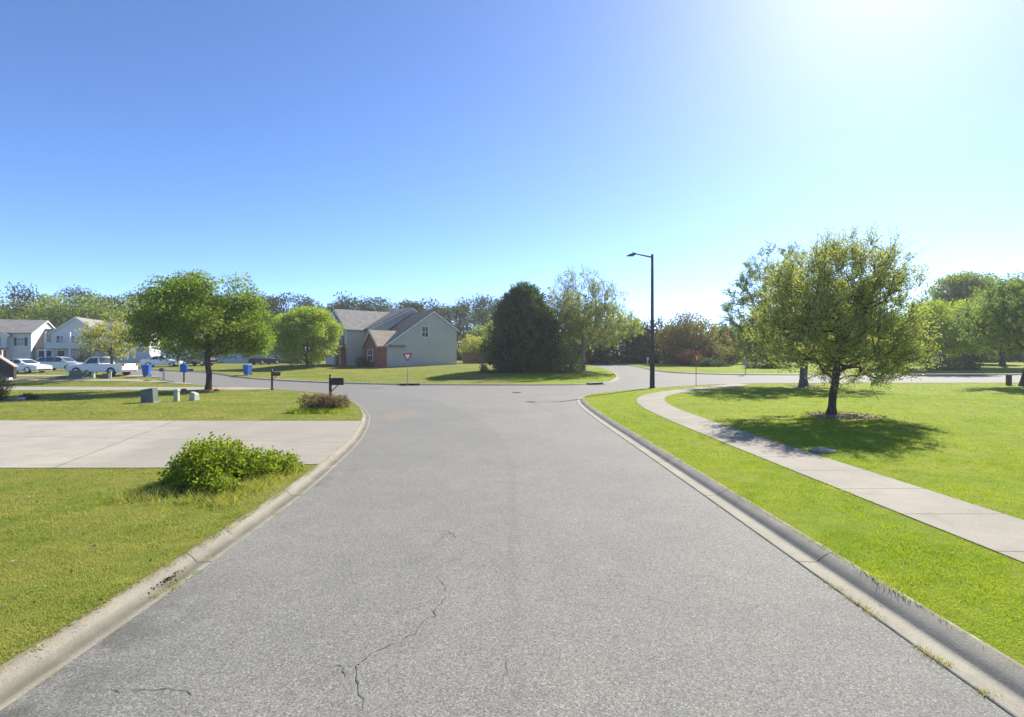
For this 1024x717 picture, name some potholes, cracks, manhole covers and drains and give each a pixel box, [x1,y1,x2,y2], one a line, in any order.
crack [330,530,452,712]
